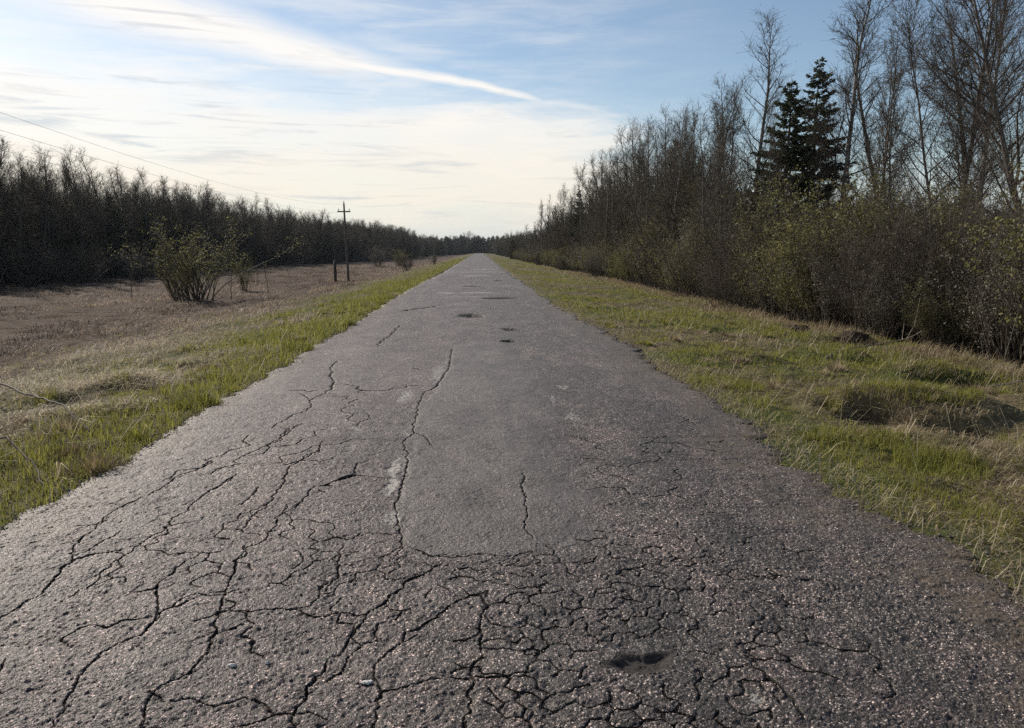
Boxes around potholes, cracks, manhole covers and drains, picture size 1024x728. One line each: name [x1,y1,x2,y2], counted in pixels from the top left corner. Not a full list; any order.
crack [0,350,896,728]
pothole [600,651,677,674]
